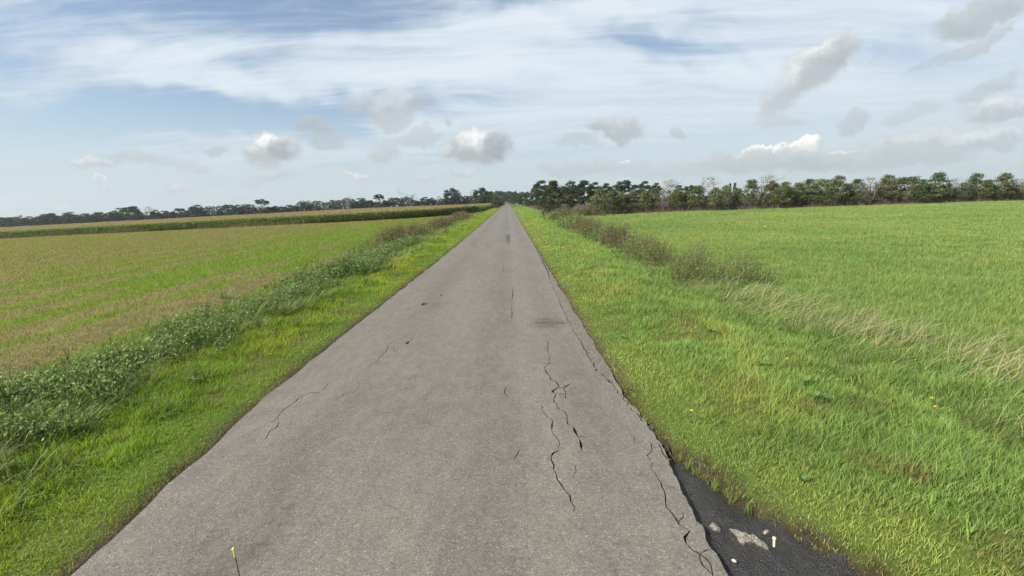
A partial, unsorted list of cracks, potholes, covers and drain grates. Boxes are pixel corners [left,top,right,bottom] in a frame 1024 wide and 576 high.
crack [601,373,713,576]
crack [542,323,584,513]
